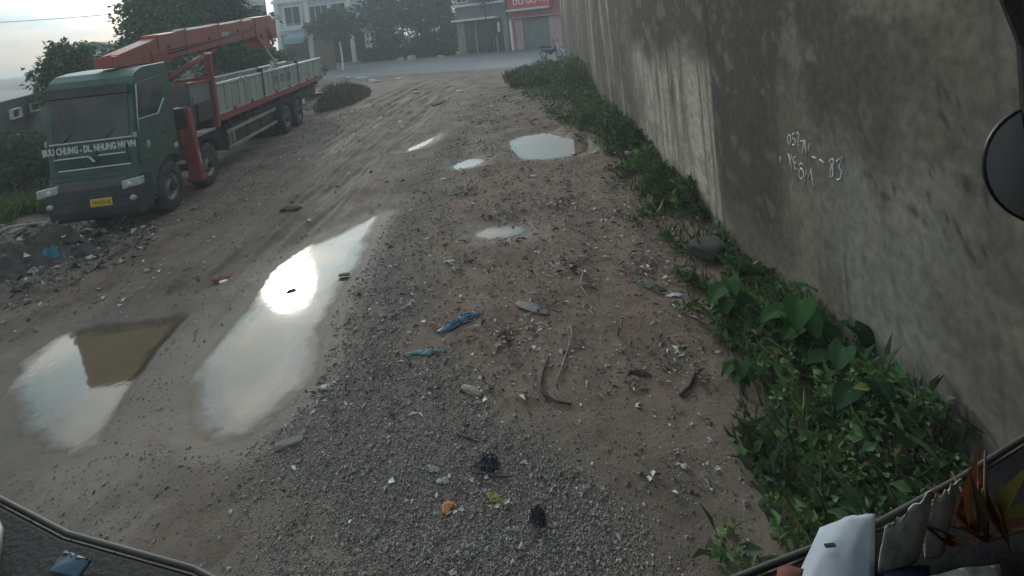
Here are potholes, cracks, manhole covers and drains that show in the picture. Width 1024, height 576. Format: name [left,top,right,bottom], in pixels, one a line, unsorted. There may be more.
pothole [495,126,603,162]
pothole [146,205,404,479]
pothole [436,151,502,171]
pothole [388,131,448,154]
pothole [0,294,228,491]
pothole [449,212,551,246]
